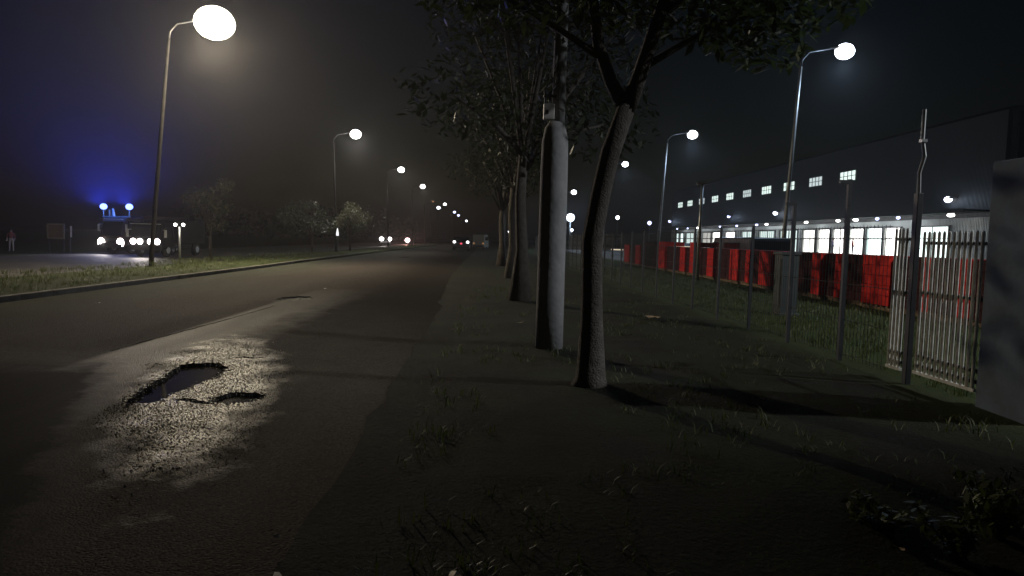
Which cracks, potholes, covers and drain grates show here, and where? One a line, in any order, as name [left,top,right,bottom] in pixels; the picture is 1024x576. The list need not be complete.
pothole [126,362,228,404]
pothole [212,392,264,403]
